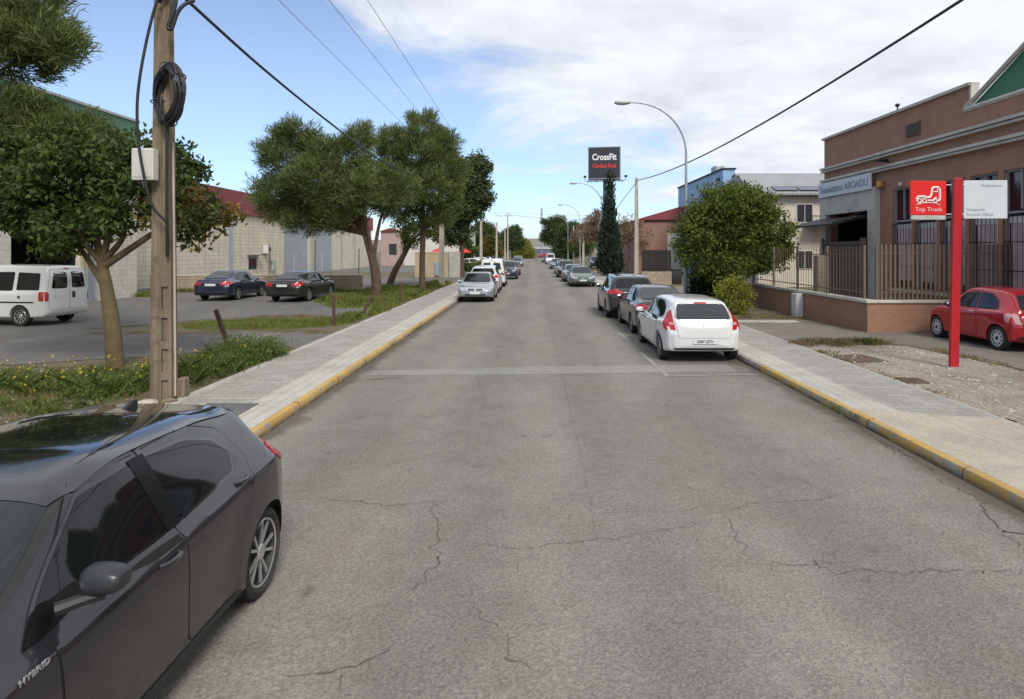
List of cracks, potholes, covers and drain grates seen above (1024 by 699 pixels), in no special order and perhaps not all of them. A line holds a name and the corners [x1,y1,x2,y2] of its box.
crack [711,560,1022,575]
crack [317,483,837,600]
manhole cover [828,354,890,363]
crack [452,587,533,670]
